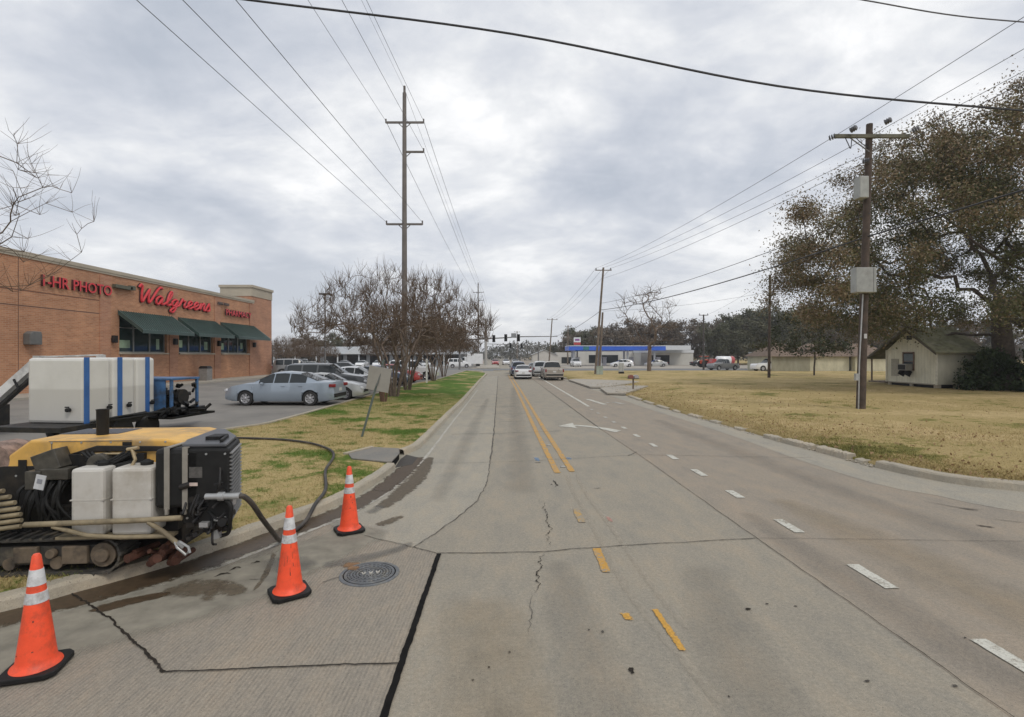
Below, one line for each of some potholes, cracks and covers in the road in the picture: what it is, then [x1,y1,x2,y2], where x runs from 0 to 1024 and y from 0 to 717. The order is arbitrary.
crack [71,593,166,672]
crack [365,480,750,634]
manhole cover [339,561,400,587]
